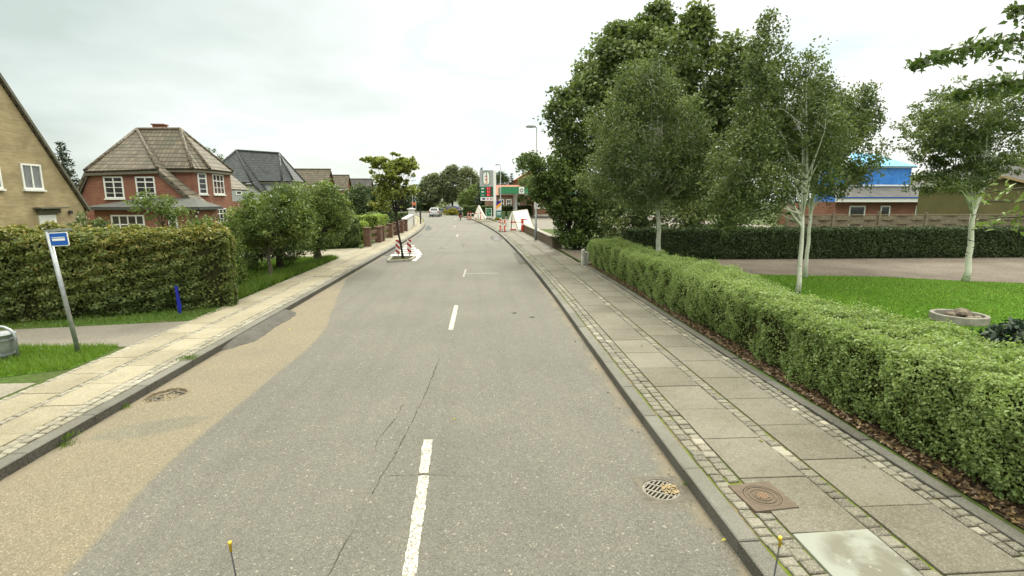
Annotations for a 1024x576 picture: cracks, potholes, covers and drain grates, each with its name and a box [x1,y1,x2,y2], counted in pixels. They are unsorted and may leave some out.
drain grate [631,476,693,504]
crack [328,361,464,576]
manhole cover [728,481,799,514]
drain grate [142,387,190,403]
